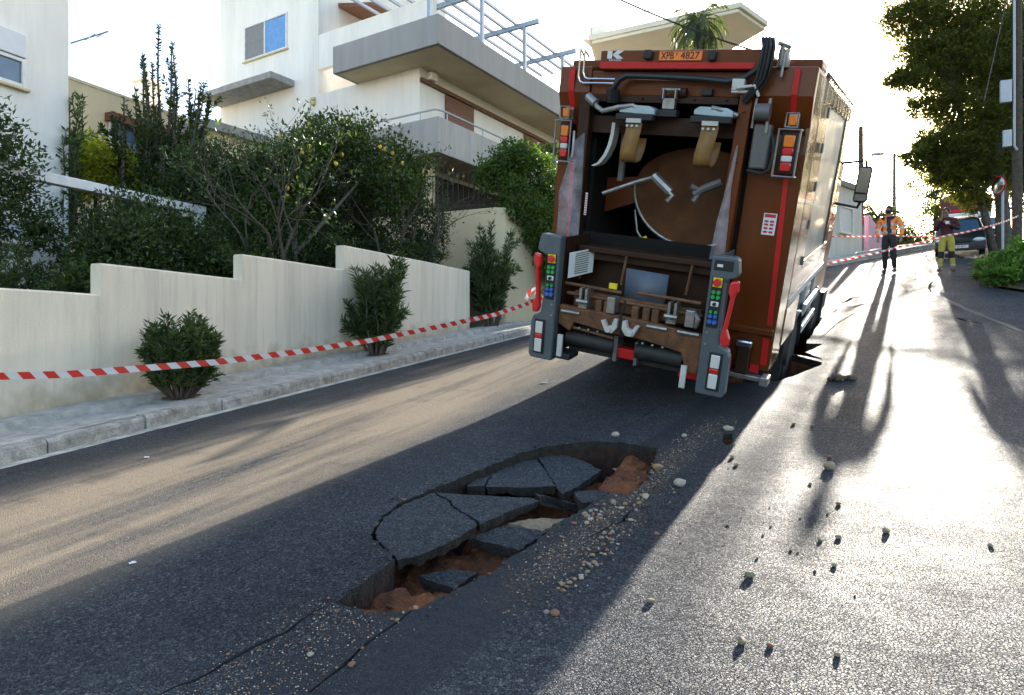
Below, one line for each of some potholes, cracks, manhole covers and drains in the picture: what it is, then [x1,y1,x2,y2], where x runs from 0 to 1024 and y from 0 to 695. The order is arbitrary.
pothole [371,503,505,597]
pothole [401,441,658,556]
pothole [793,318,822,360]
crack [159,601,412,695]
pothole [338,567,436,613]
